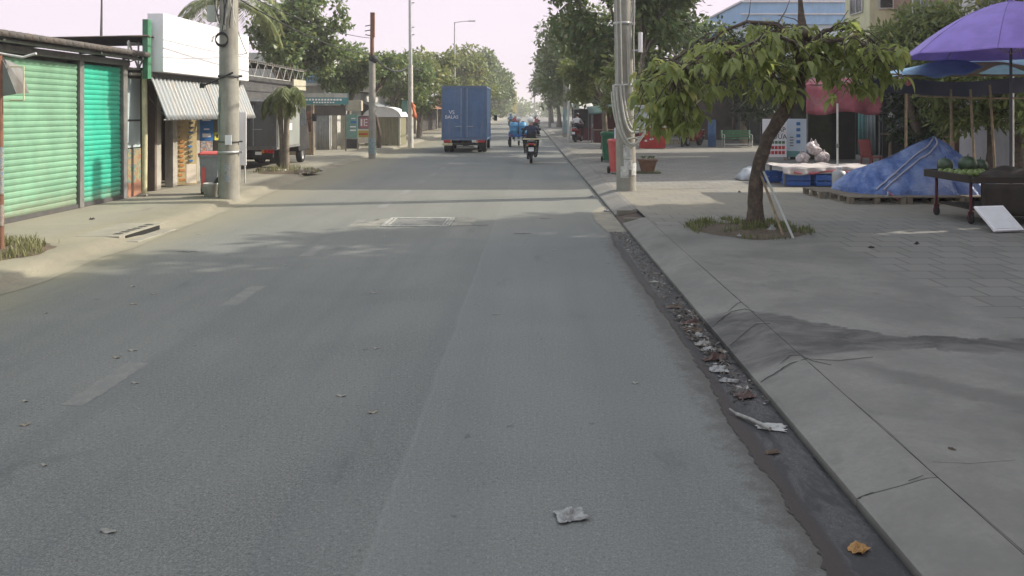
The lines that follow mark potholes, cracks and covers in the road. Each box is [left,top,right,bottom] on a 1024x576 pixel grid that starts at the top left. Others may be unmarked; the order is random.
manhole cover [380,217,455,227]
